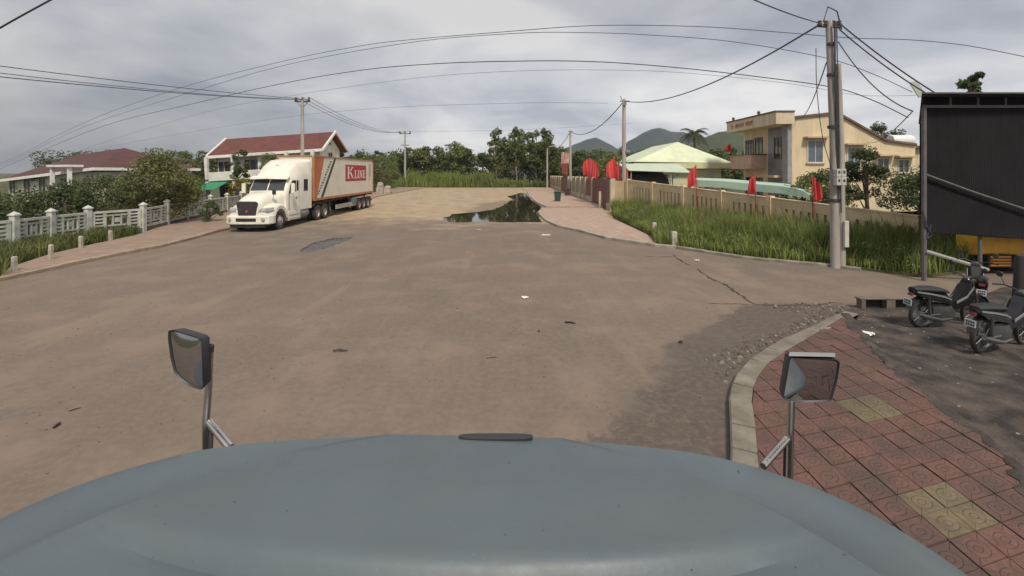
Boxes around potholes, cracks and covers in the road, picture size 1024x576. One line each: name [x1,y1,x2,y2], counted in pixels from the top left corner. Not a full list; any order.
crack [646,255,836,306]
